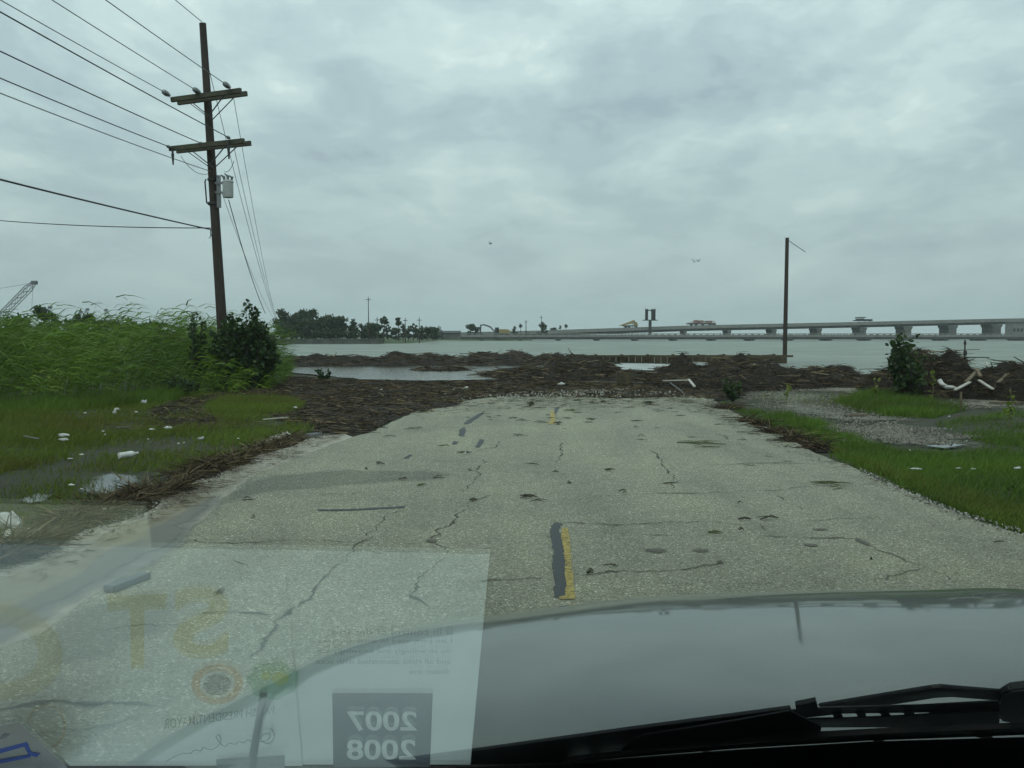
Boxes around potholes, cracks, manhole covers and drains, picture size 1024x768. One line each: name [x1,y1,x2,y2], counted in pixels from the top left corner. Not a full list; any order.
crack [409,444,498,609]
crack [573,561,726,575]
crack [74,510,402,664]
crack [872,546,955,581]
